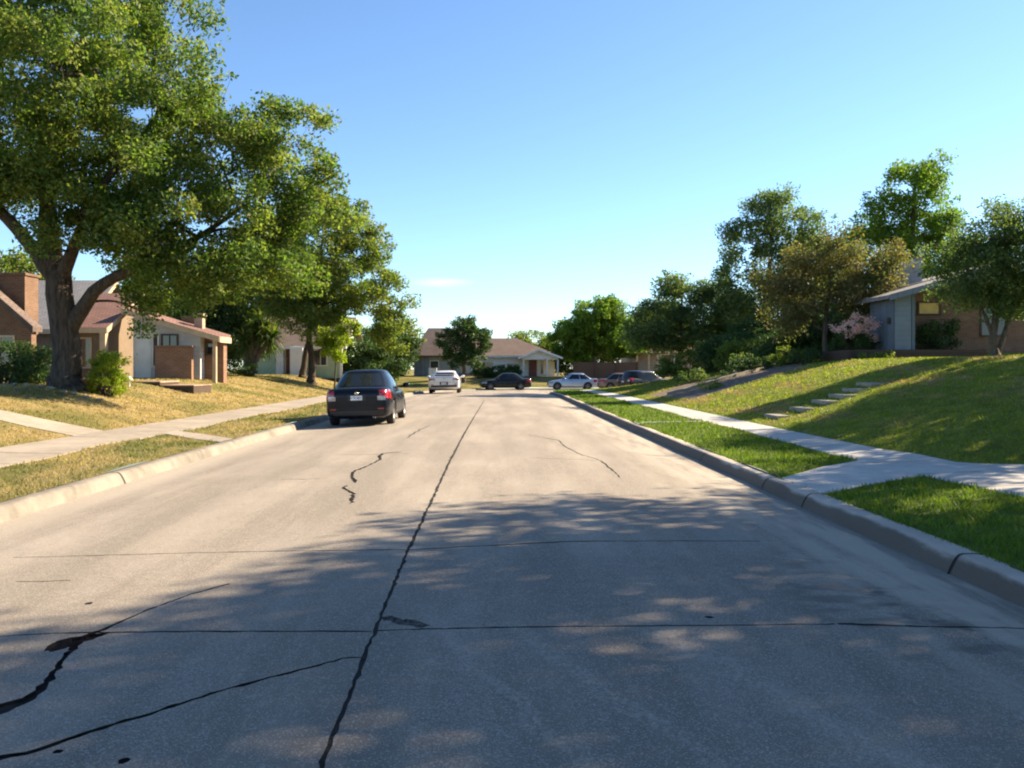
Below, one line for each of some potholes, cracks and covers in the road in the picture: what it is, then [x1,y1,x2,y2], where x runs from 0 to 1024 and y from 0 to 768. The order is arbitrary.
pothole [380,616,430,629]
crack [531,435,621,478]
crack [342,425,430,503]
